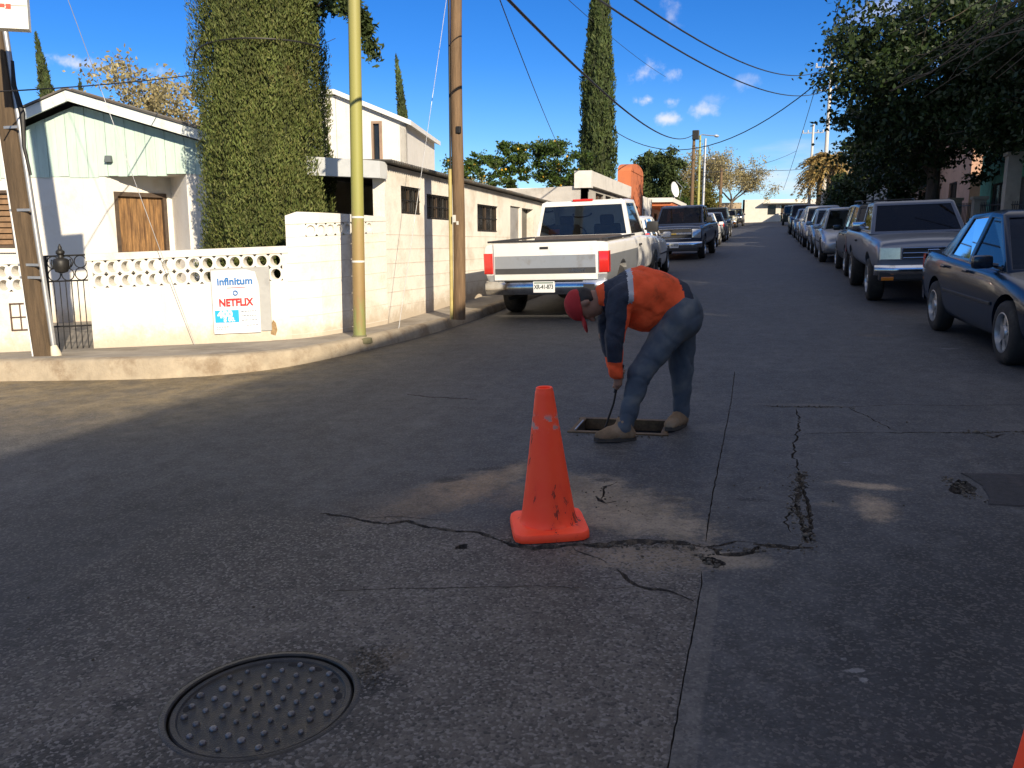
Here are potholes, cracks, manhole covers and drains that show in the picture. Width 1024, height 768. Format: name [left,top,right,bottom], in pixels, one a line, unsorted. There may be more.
crack [320,404,1024,602]
manhole cover [158,652,361,763]
pothole [948,479,977,495]
